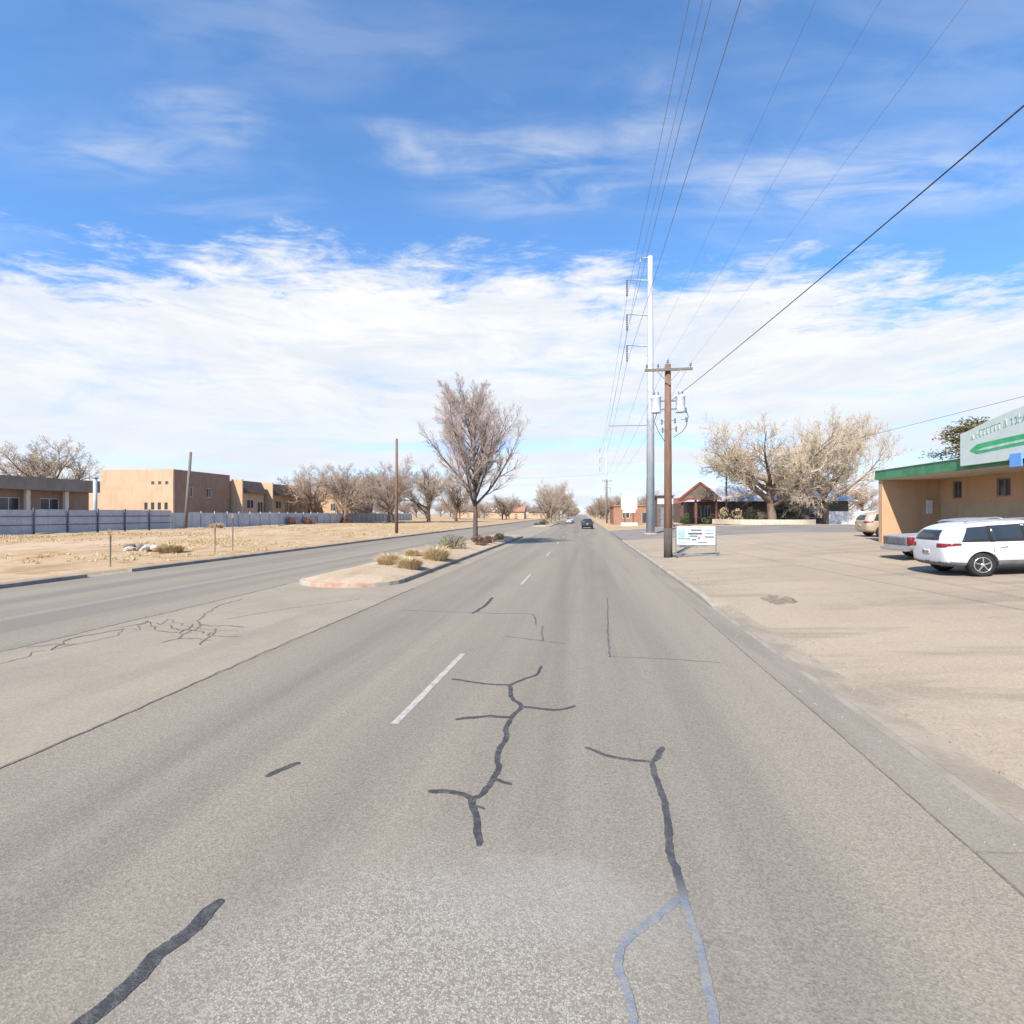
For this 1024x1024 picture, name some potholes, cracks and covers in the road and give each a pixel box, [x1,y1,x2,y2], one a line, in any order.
crack [0,584,566,777]
crack [606,598,1024,897]
